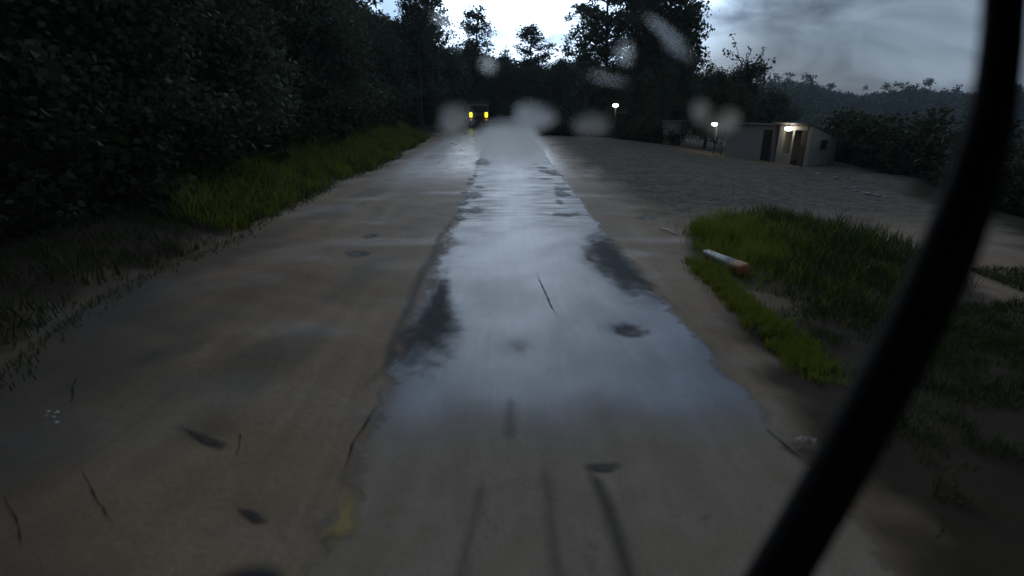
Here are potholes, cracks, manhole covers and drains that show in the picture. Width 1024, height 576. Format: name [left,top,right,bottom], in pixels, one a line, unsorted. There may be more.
crack [343,406,376,471]
pothole [615,324,648,336]
crack [4,496,21,542]
pothole [239,509,266,522]
crack [765,427,806,461]
pothole [185,428,224,447]
crack [81,470,113,523]
